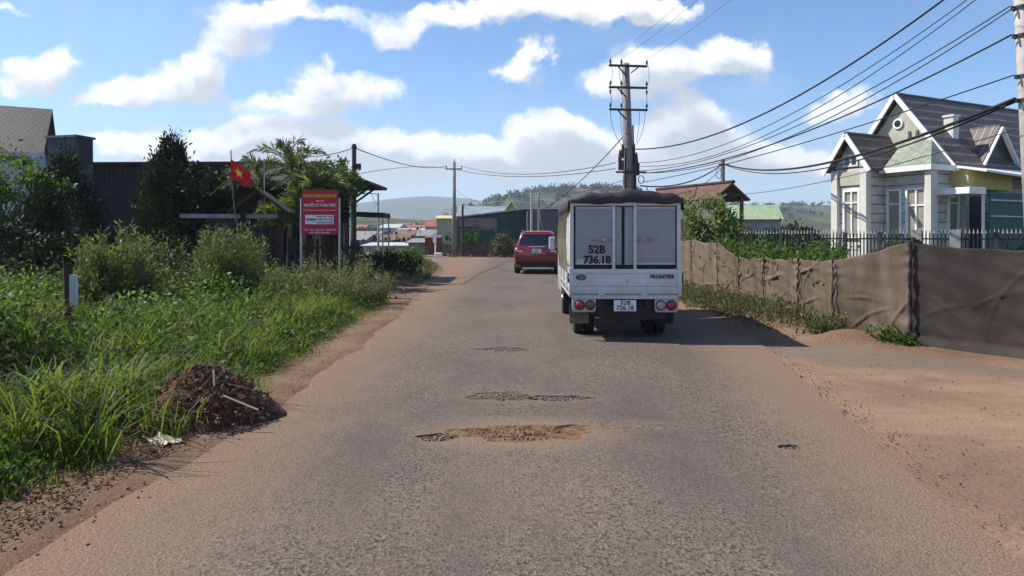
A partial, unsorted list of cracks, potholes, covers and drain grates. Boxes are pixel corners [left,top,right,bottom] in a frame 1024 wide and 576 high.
pothole [414,433,459,441]
pothole [444,424,591,442]
pothole [465,391,539,401]
